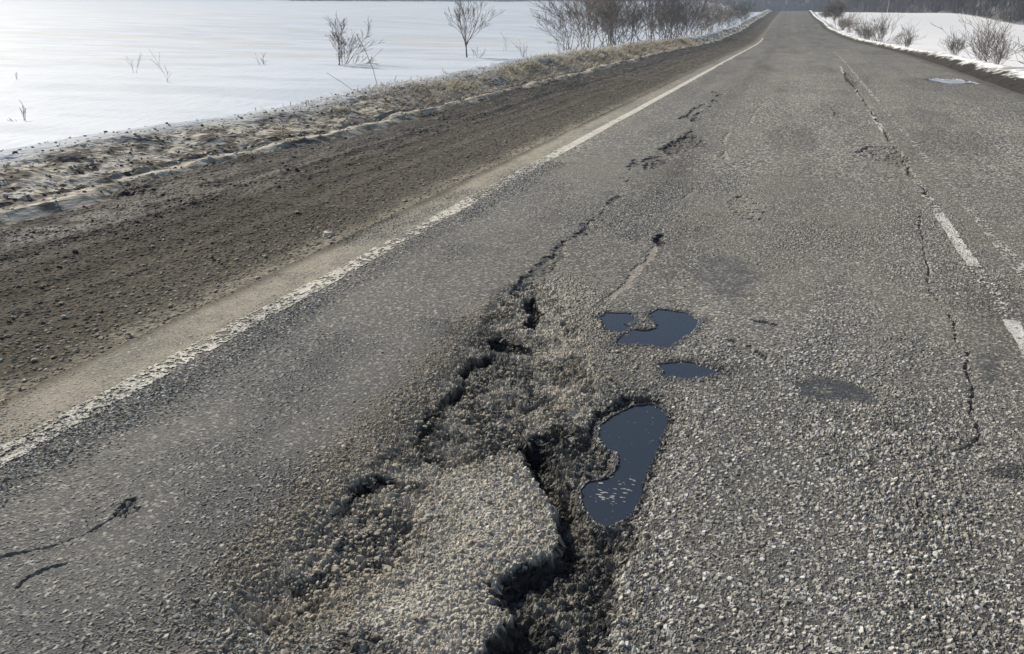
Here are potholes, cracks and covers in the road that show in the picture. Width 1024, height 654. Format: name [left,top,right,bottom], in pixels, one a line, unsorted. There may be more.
pothole [323,624,408,654]
